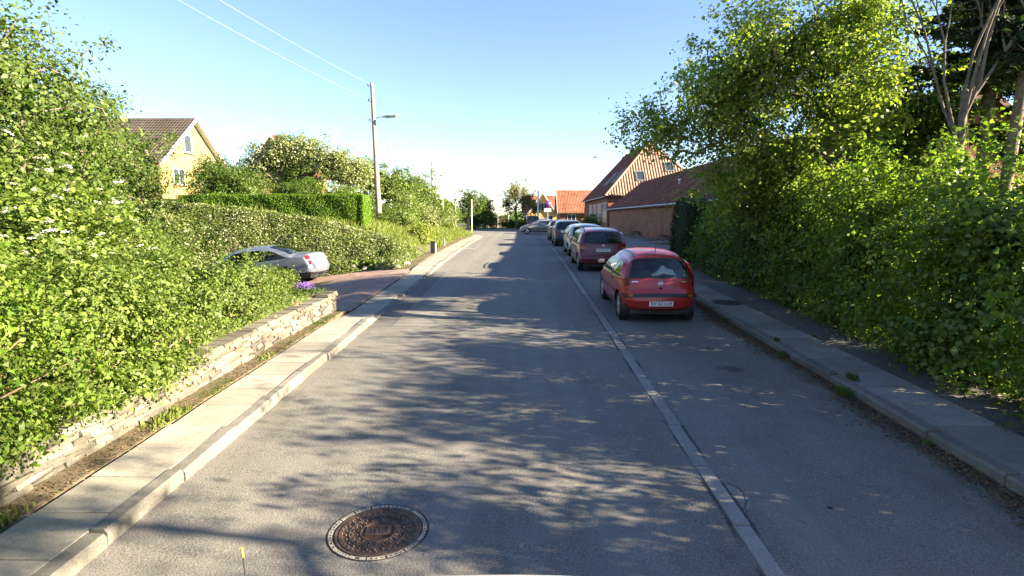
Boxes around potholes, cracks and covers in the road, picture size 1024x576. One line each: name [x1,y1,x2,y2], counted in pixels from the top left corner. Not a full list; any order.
manhole cover [326,504,429,562]
